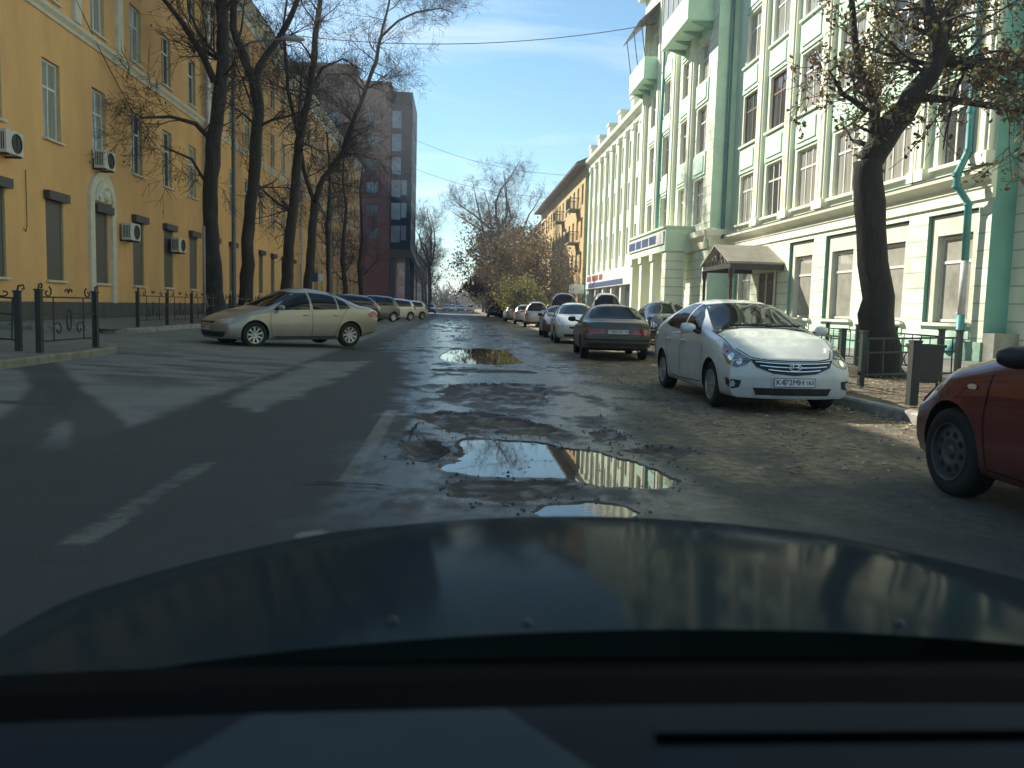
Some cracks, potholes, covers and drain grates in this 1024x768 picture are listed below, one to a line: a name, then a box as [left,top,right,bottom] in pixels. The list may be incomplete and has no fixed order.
pothole [404,439,451,463]
pothole [439,348,525,365]
pothole [435,383,552,404]
pothole [438,437,683,489]
pothole [446,478,582,502]
pothole [531,500,641,518]
pothole [414,412,569,438]
